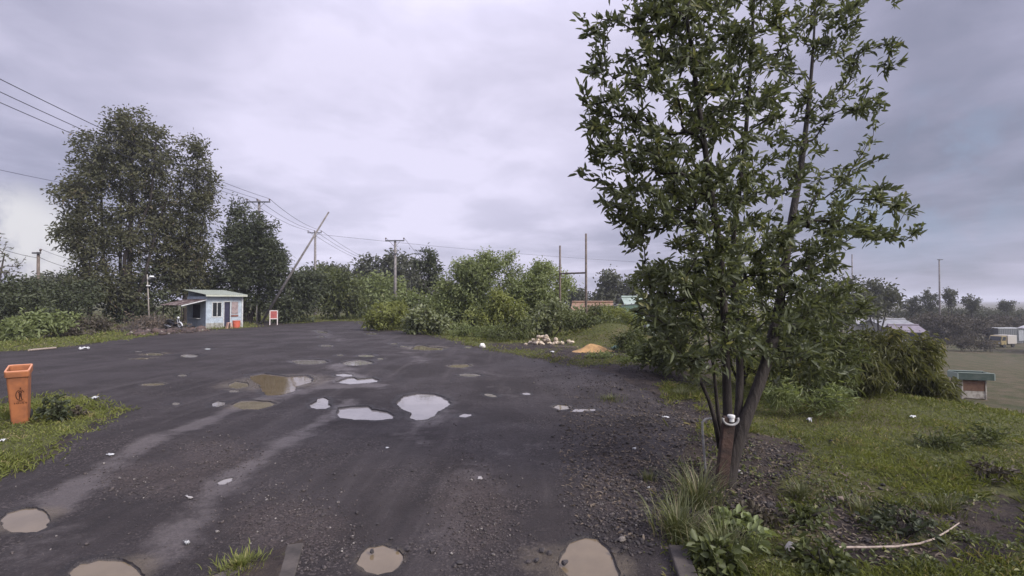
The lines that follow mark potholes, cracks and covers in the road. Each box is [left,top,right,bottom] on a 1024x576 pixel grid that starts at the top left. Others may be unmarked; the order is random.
pothole [356,544,404,575]
pothole [396,392,451,420]
pothole [66,557,146,576]
pothole [557,535,621,576]
pothole [249,373,314,396]
pothole [0,507,51,533]
pothole [336,405,395,420]
pothole [309,397,331,409]
pothole [230,399,276,409]
